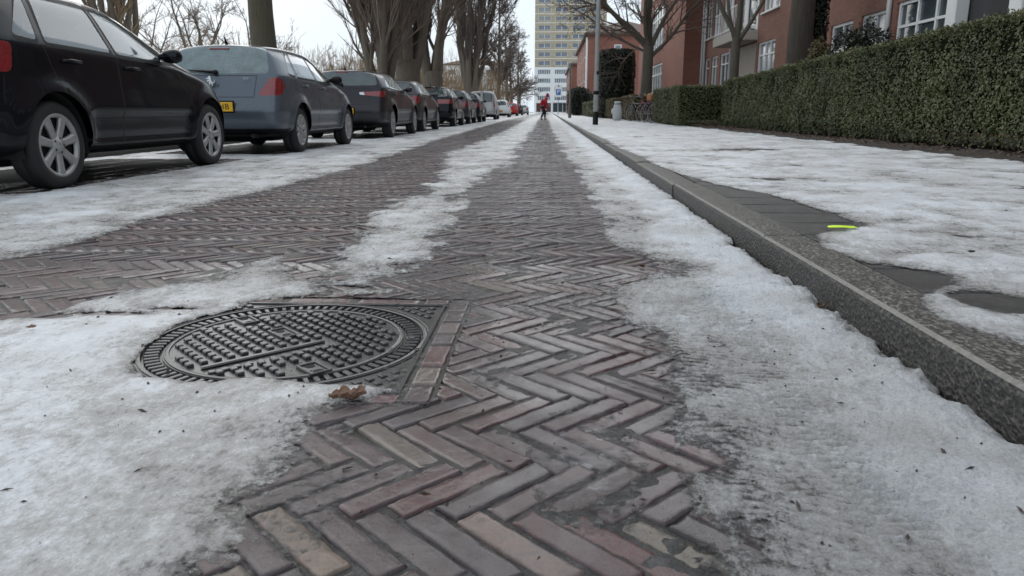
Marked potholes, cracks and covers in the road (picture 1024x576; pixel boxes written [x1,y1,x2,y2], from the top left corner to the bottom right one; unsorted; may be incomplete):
manhole cover [130,302,447,394]
